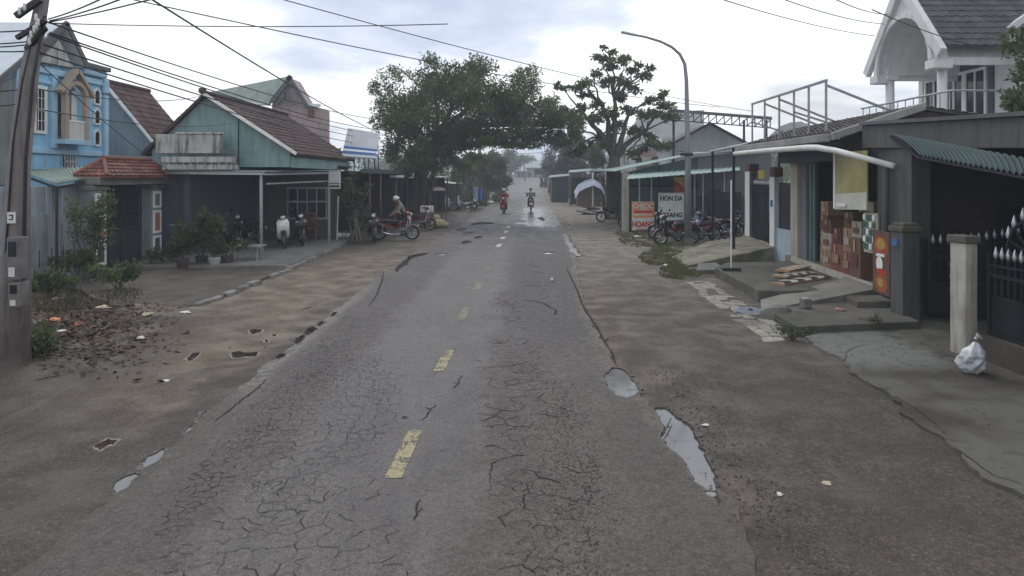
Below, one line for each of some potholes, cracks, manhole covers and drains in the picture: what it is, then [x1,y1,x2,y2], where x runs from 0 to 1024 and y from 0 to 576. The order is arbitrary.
pothole [652,407,728,505]
crack [382,291,604,576]
pothole [135,447,170,470]
pothole [228,351,260,359]
crack [527,265,616,363]
pothole [601,367,644,398]
crack [137,316,403,576]
pothole [108,471,140,495]
pothole [93,438,121,452]
crack [370,271,384,305]
